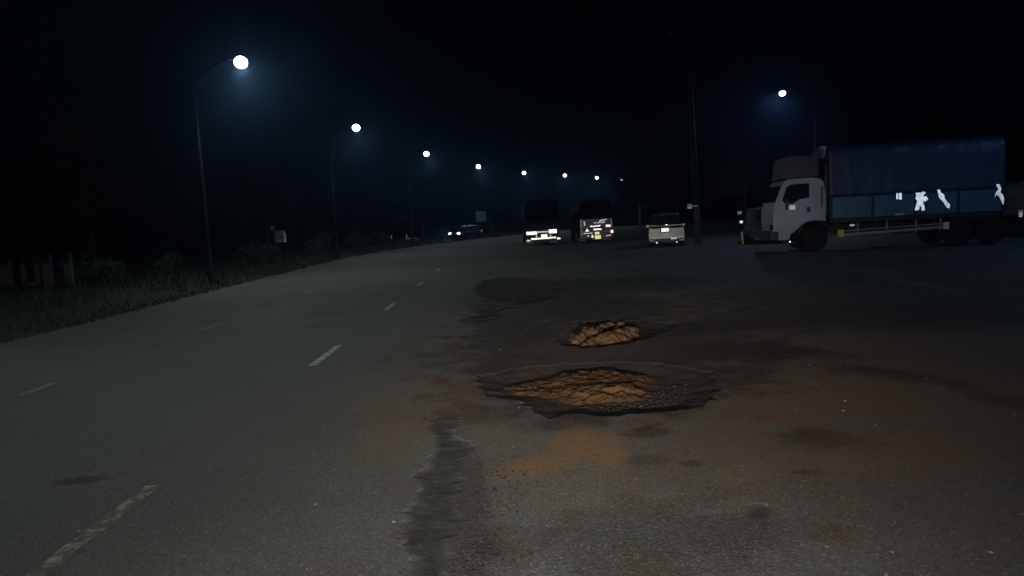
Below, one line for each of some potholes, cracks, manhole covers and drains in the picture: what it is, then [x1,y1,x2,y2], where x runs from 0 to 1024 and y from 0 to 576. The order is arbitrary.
pothole [552,319,679,348]
pothole [472,361,725,419]
